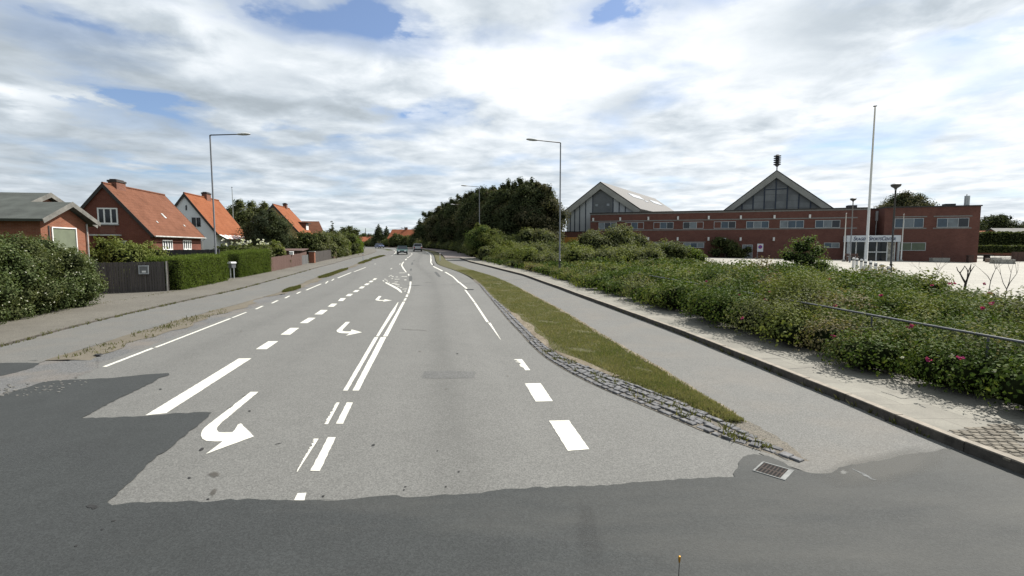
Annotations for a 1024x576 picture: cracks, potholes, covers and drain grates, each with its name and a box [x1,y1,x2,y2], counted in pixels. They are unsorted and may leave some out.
drain grate [752,461,794,481]
